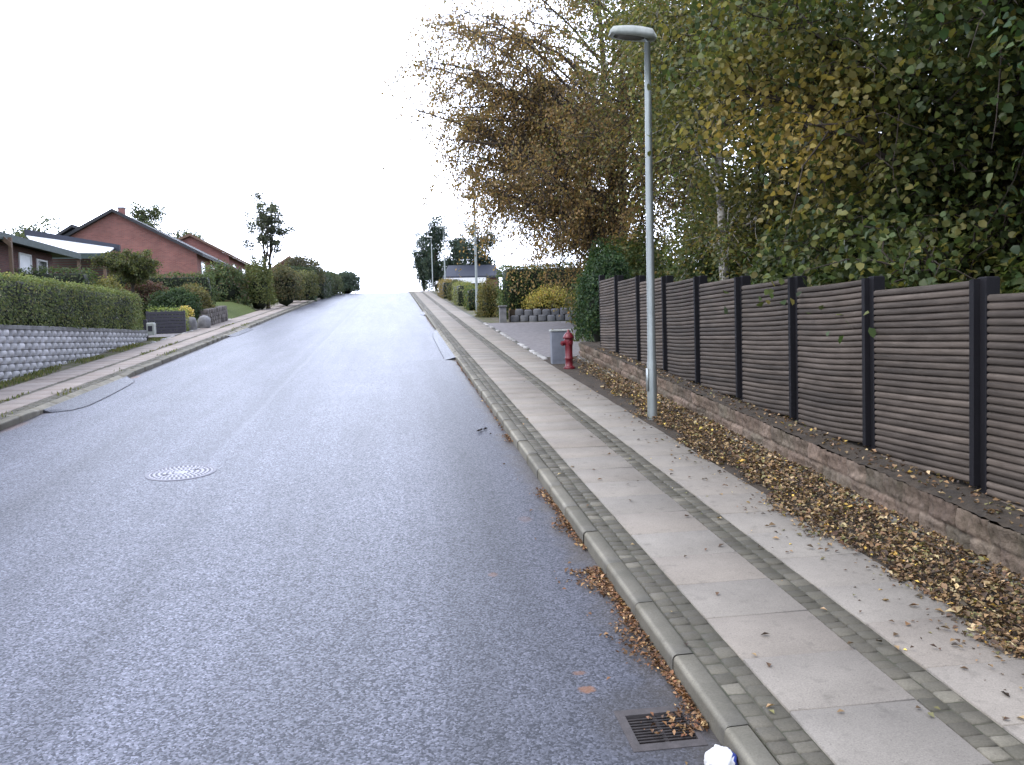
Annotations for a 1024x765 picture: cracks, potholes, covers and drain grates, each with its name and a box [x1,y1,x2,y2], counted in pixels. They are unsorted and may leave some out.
drain grate [613,705,708,753]
manhole cover [144,464,217,481]
